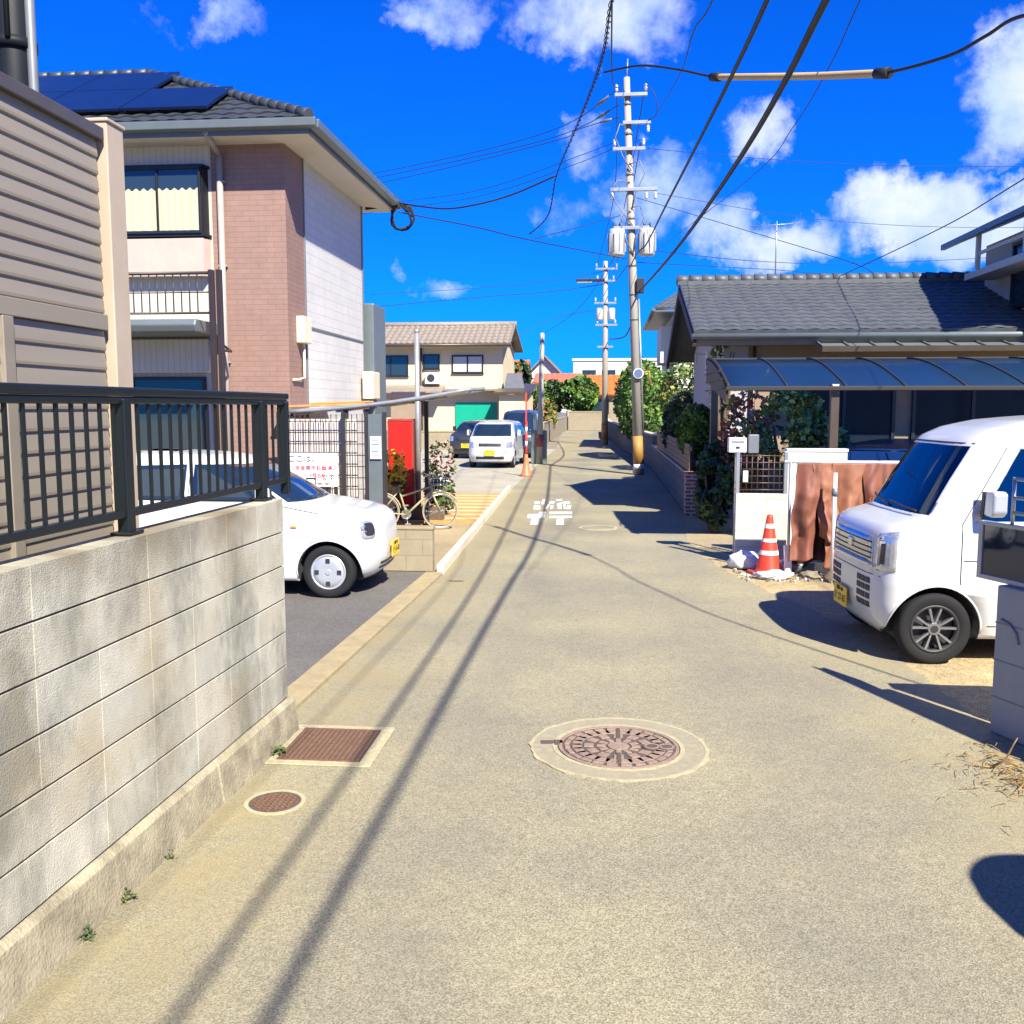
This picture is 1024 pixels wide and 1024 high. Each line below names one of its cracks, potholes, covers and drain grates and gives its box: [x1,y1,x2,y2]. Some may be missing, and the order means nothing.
manhole cover [528,717,710,782]
utility cover [243,789,306,816]
